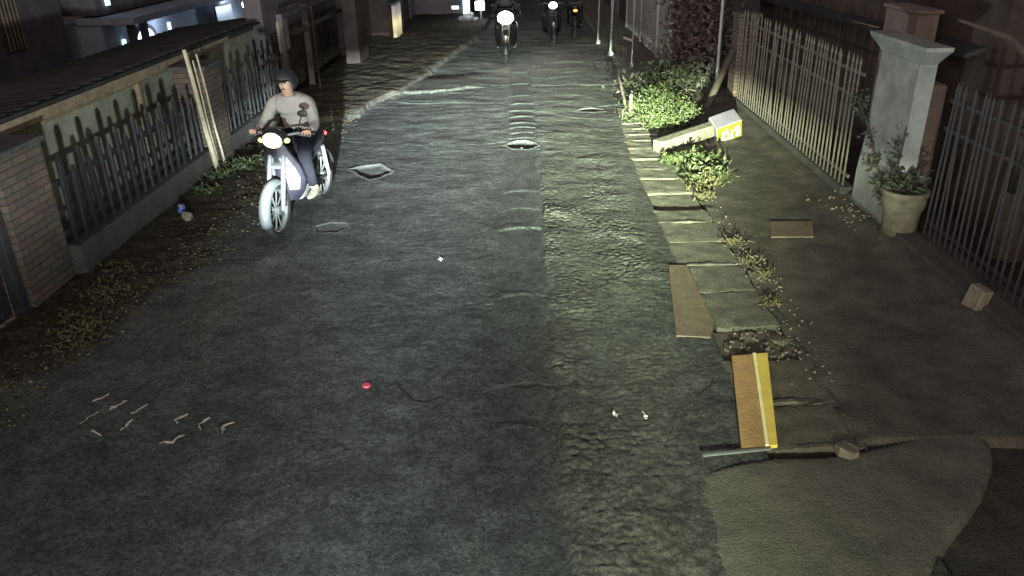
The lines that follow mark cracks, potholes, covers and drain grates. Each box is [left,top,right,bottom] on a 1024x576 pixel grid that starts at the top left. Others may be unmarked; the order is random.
crack [777,400,830,411]
pothole [503,140,540,150]
crack [515,384,558,392]
crack [385,370,460,403]
crack [497,422,547,434]
pothole [347,163,394,181]
pothole [312,221,351,234]
